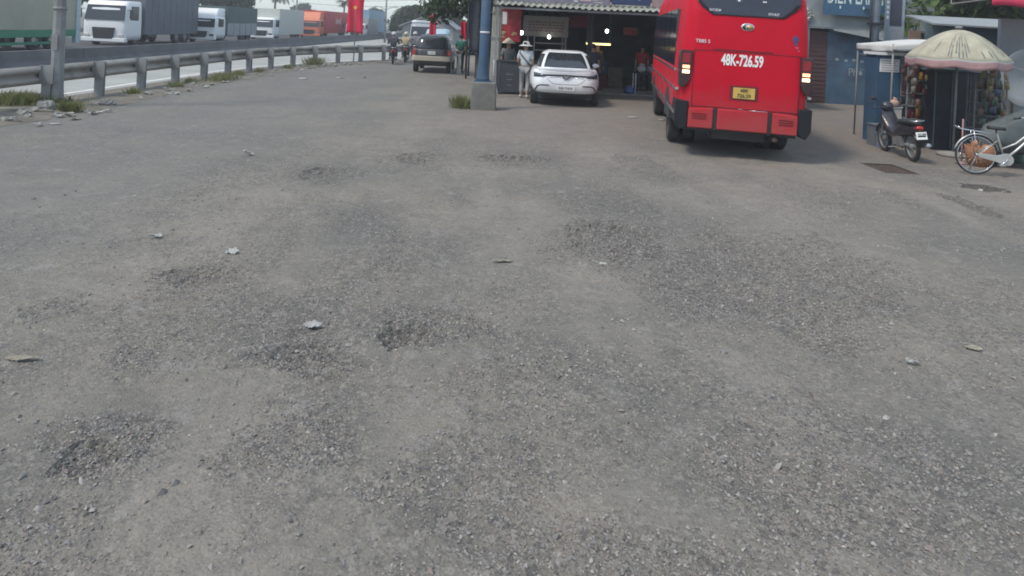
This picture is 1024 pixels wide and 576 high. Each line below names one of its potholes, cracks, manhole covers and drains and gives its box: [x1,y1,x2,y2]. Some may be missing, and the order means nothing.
pothole [160,266,240,290]
pothole [298,167,338,180]
pothole [45,437,129,481]
manhole cover [861,163,920,175]
pothole [475,154,557,164]
pothole [375,321,439,352]
